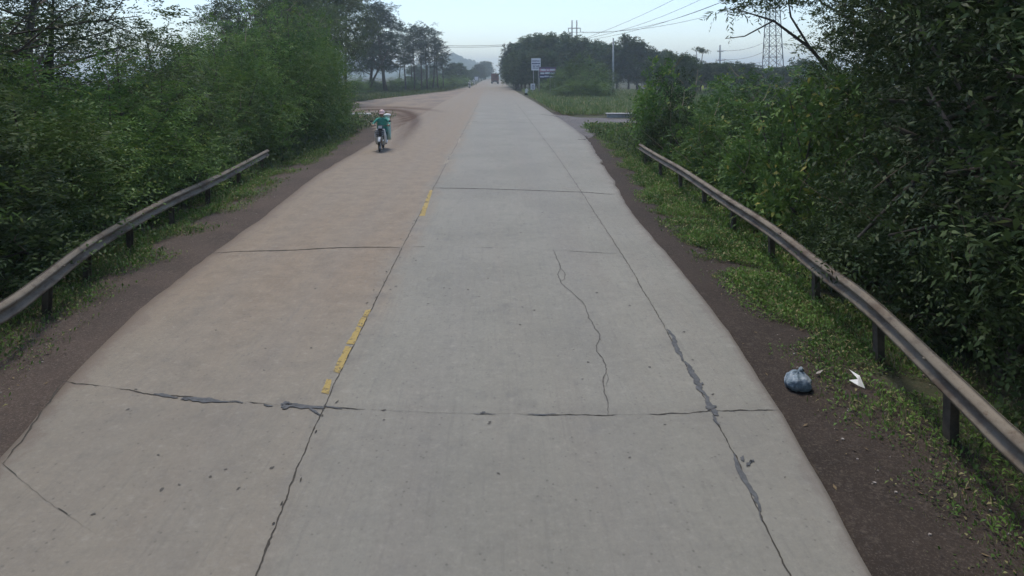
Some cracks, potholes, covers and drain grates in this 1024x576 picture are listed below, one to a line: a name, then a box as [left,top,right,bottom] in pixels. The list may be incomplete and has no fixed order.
crack [553,250,609,412]
